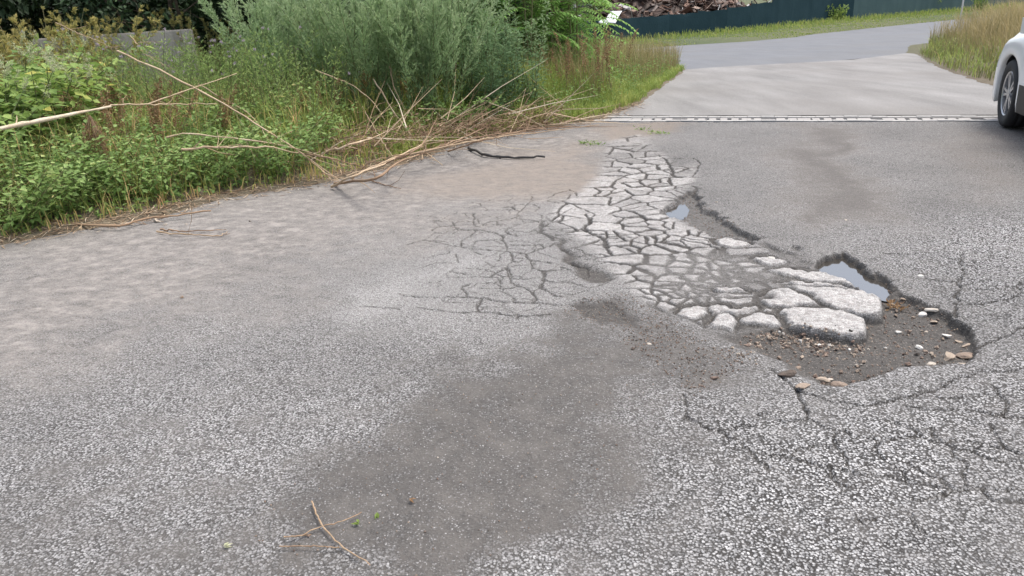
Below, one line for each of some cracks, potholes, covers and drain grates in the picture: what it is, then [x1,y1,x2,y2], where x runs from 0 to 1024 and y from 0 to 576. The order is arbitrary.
crack [680,368,1024,536]
pothole [756,240,816,269]
crack [977,326,1024,350]
pothole [706,250,981,387]
